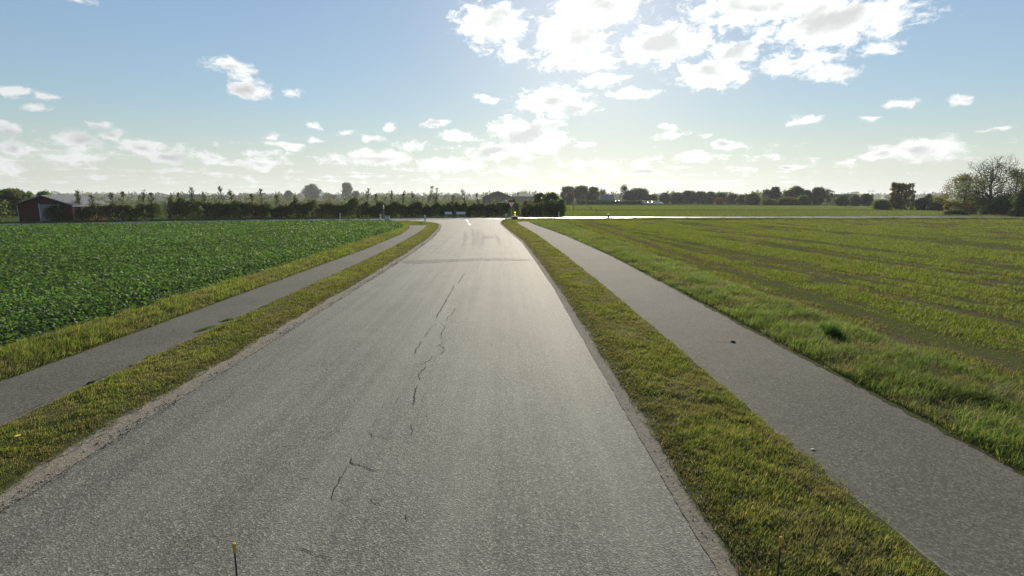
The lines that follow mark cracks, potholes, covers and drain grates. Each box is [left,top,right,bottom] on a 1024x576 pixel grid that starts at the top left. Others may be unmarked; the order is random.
crack [331,457,377,501]
